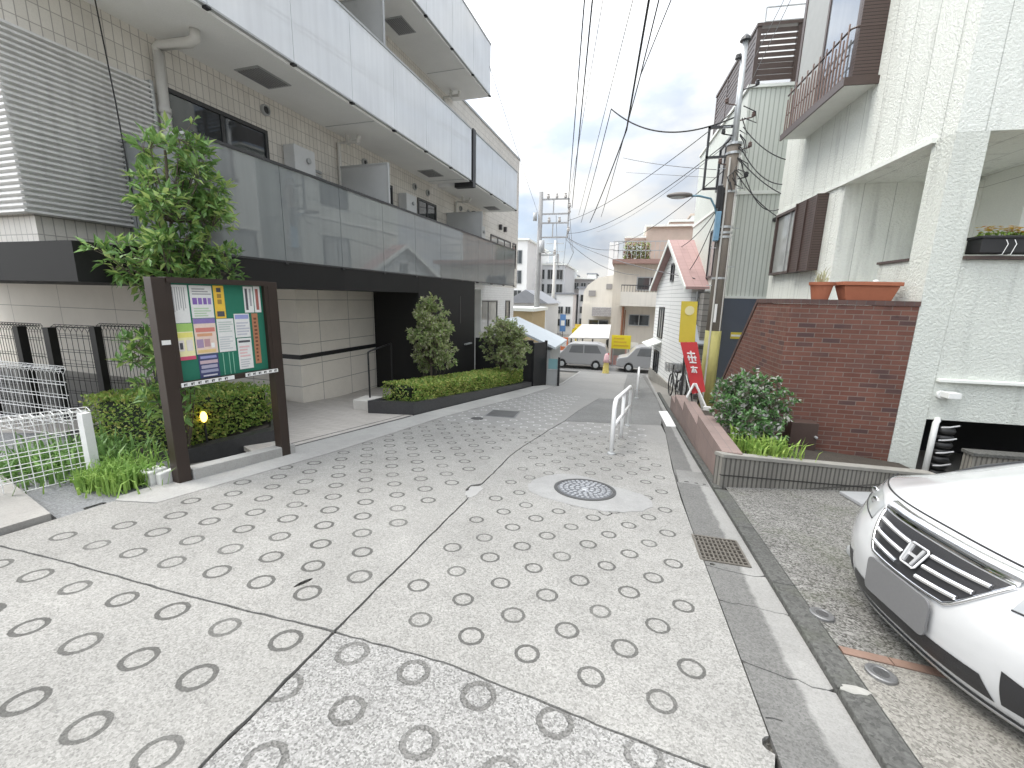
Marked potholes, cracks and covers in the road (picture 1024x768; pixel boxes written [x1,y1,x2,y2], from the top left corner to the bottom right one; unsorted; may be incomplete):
utility cover [485,410,520,418]
manhole cover [554,479,616,501]
drain grate [691,534,752,568]
